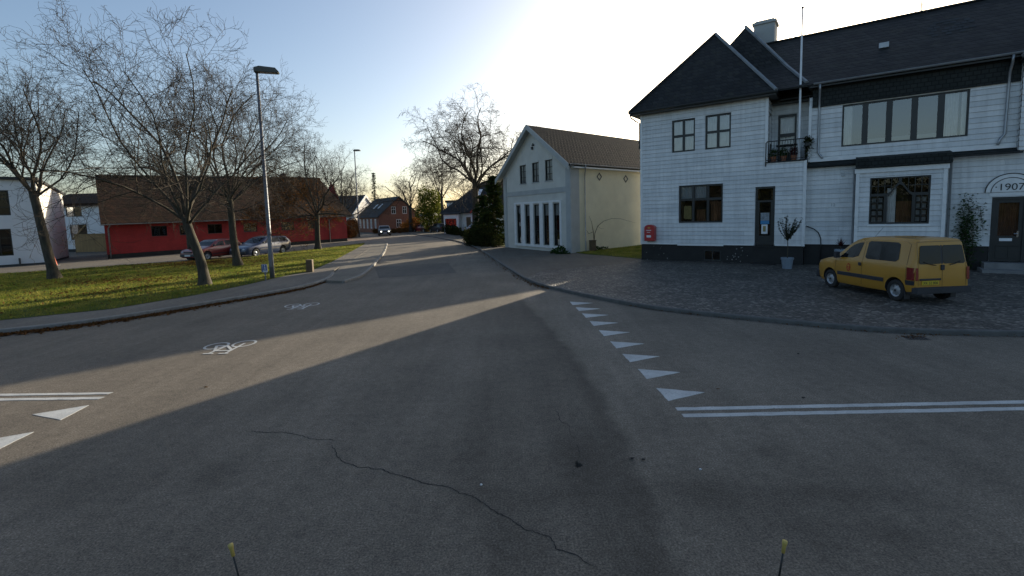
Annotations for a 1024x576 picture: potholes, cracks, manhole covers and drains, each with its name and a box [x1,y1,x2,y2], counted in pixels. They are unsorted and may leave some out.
crack [254,431,590,565]
